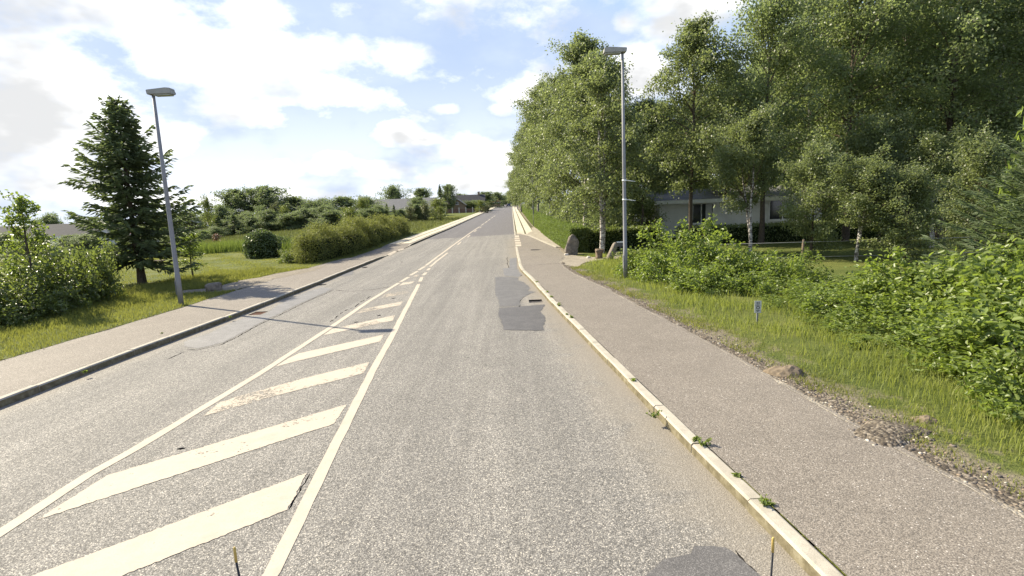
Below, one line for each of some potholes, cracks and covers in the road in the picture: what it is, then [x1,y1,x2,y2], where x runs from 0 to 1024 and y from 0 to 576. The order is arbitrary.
crack [199,287,386,350]
